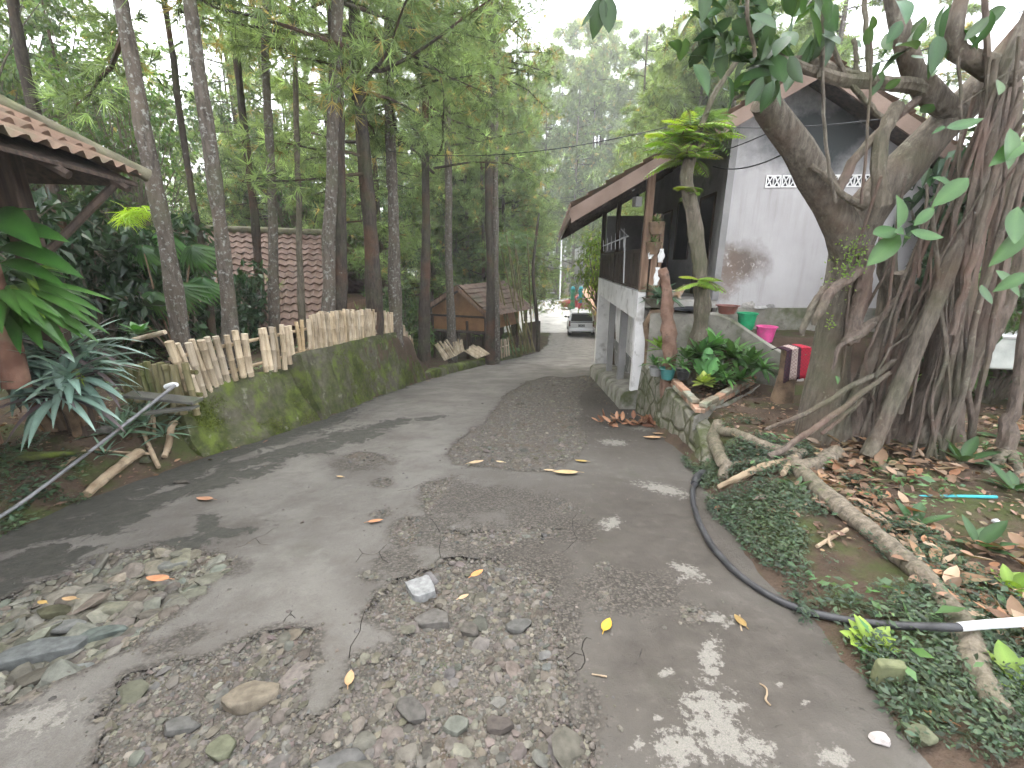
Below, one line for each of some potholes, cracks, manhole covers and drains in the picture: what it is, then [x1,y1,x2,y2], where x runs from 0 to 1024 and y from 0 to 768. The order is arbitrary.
pothole [439,525,563,551]
pothole [91,556,599,768]
pothole [391,516,423,547]
pothole [374,478,391,487]
pothole [346,452,386,465]
pothole [371,509,390,518]
pothole [0,547,238,710]
crack [567,637,590,672]
pothole [421,478,453,518]
